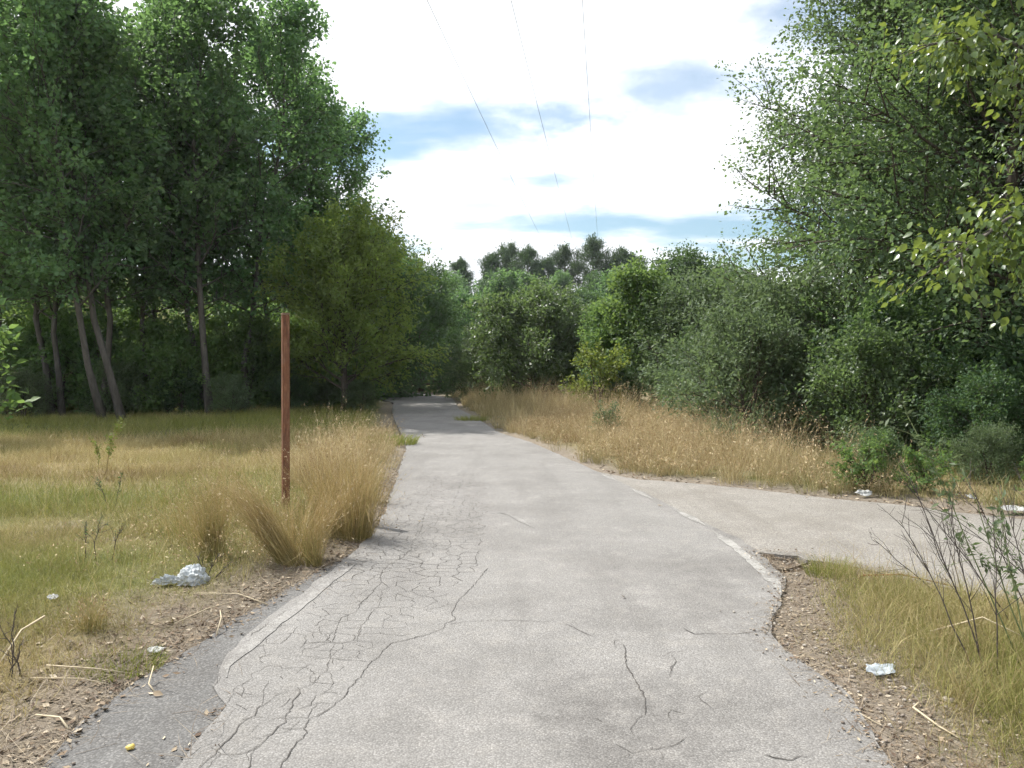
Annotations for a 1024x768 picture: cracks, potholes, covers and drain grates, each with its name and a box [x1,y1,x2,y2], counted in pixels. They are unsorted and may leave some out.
crack [201,473,587,768]
pothole [763,554,809,574]
crack [597,641,812,762]
